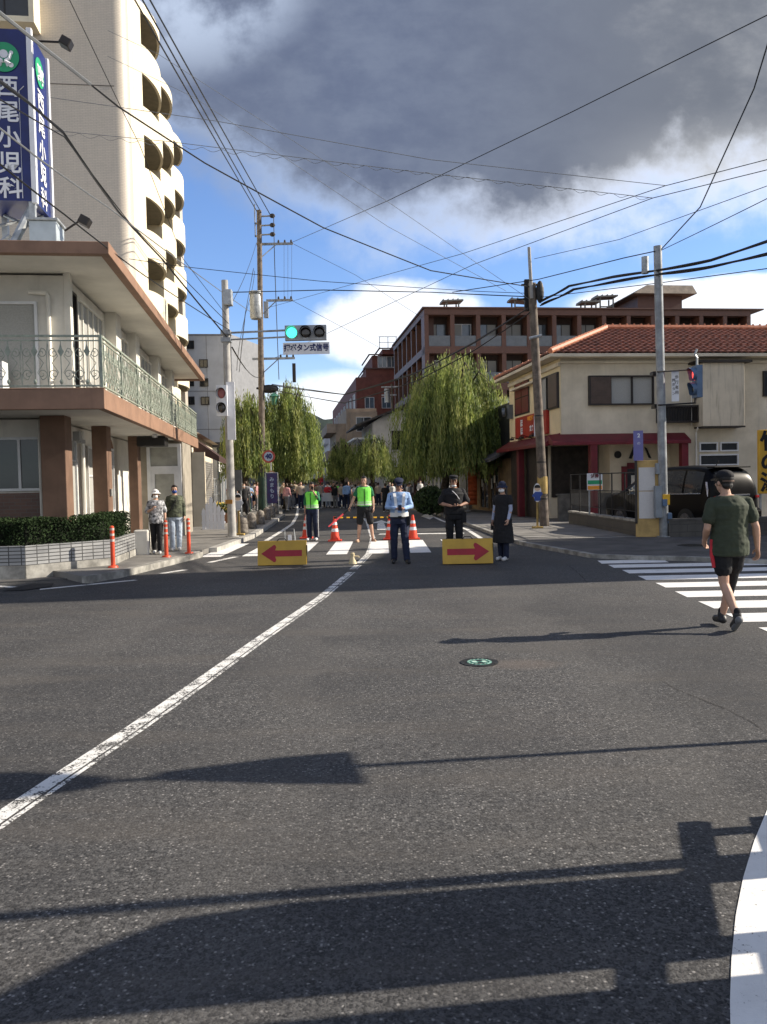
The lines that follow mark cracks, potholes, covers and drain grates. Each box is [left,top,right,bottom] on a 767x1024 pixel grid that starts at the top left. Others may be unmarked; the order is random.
manhole cover [460,658,499,667]
